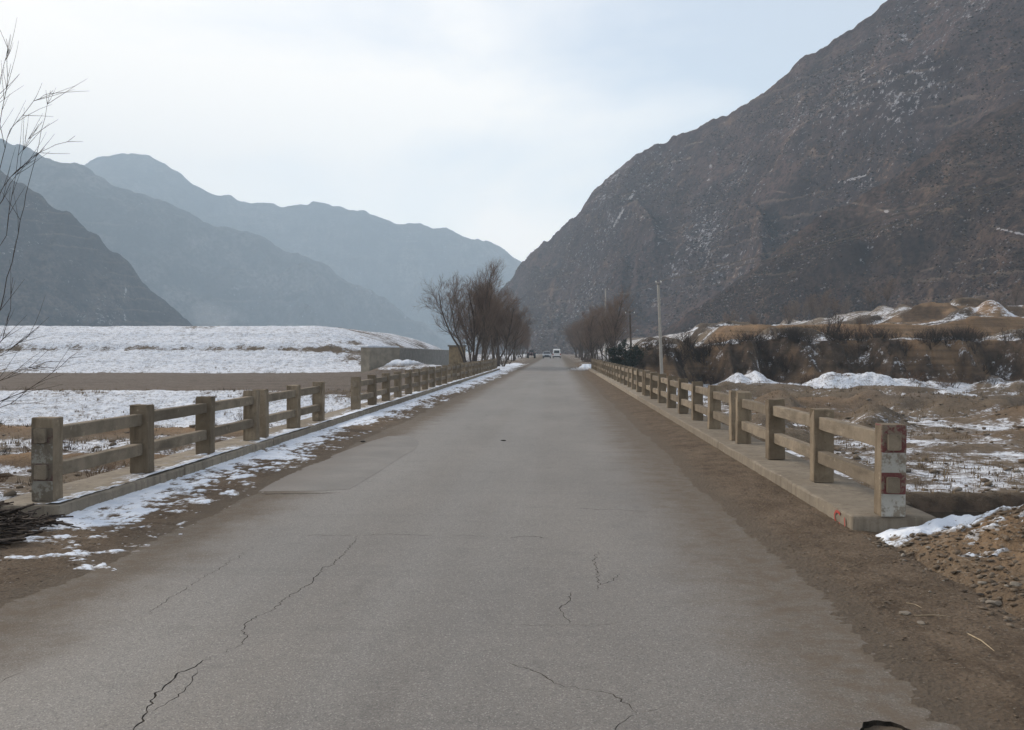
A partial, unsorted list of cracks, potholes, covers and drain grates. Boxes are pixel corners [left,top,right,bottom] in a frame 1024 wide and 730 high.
crack [510,663,669,730]
crack [133,534,542,730]
